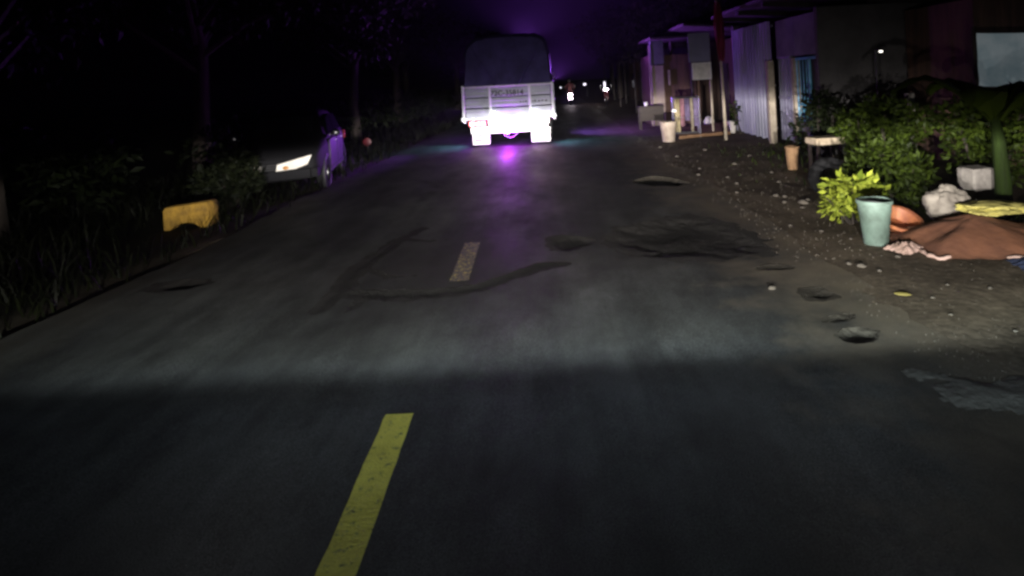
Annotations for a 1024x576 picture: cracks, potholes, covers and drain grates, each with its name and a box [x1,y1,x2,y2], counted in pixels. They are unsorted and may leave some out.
pothole [821,313,856,323]
pothole [633,176,689,187]
pothole [833,326,880,344]
pothole [137,279,215,293]
pothole [544,235,597,251]
pothole [796,287,842,302]
